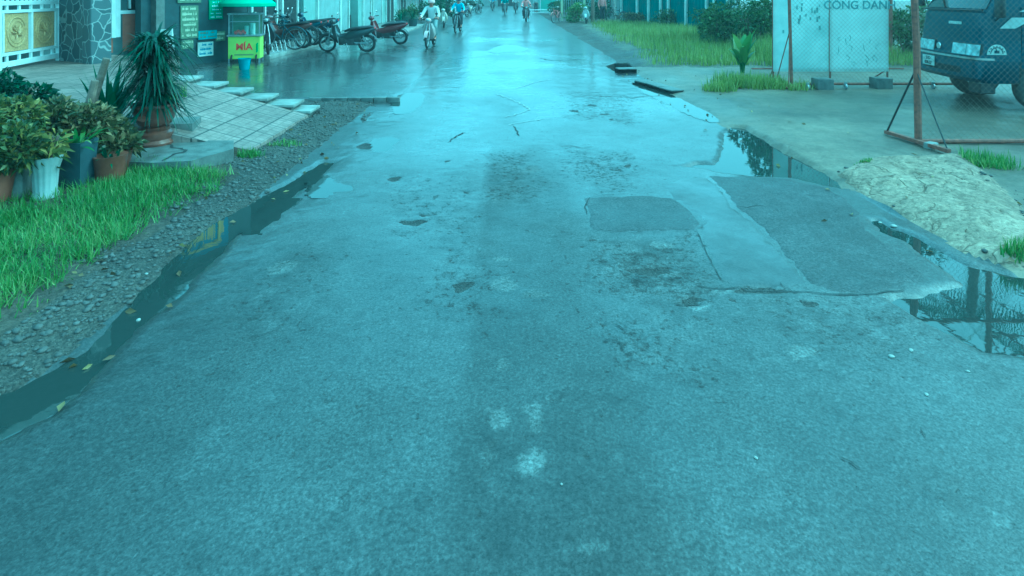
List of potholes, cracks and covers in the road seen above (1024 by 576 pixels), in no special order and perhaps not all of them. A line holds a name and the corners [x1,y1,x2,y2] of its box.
crack [497,79,552,135]
pothole [452,282,475,293]
